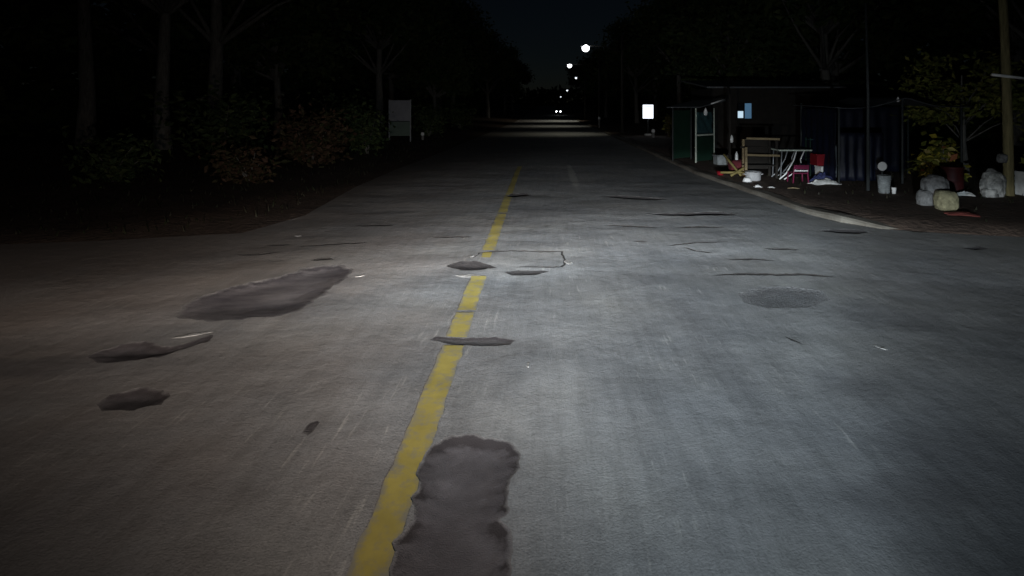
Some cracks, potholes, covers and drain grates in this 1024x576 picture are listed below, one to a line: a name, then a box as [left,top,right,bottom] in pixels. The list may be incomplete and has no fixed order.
pothole [738,286,830,308]
pothole [447,261,497,271]
pothole [173,264,354,322]
pothole [431,336,516,346]
crack [607,225,834,277]
pothole [97,387,170,412]
pothole [86,335,213,363]
crack [432,236,566,268]
pothole [302,421,320,436]
